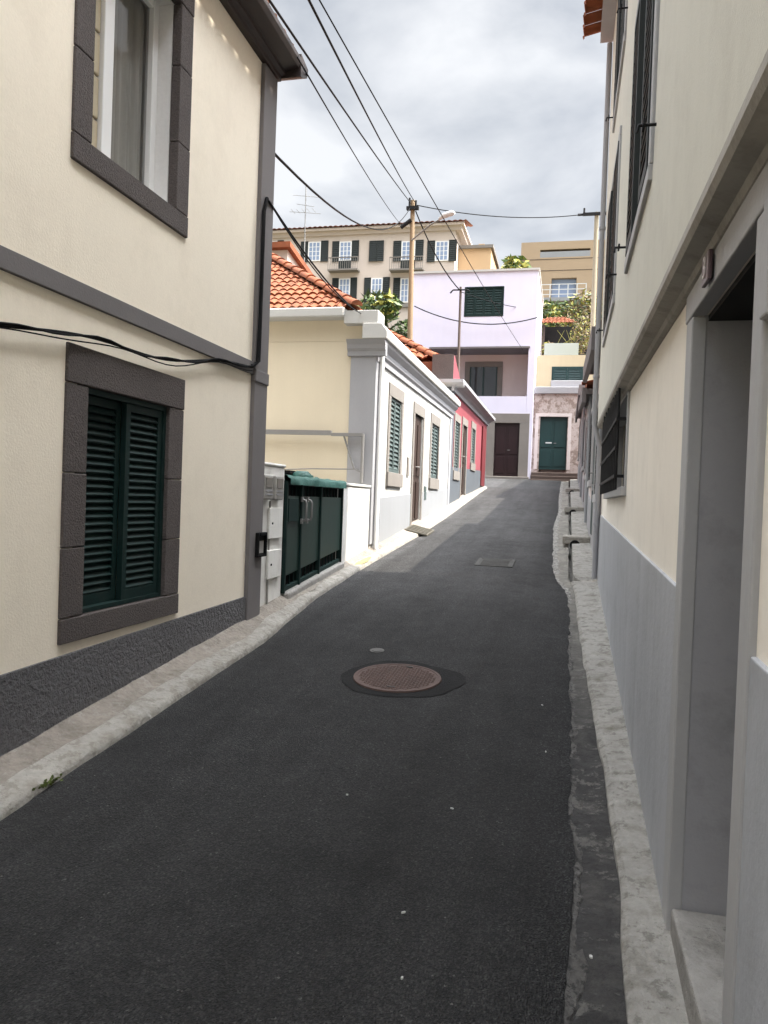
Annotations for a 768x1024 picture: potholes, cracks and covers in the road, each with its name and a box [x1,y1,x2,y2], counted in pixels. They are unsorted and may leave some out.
manhole cover [475,558,515,568]
manhole cover [341,660,466,697]
